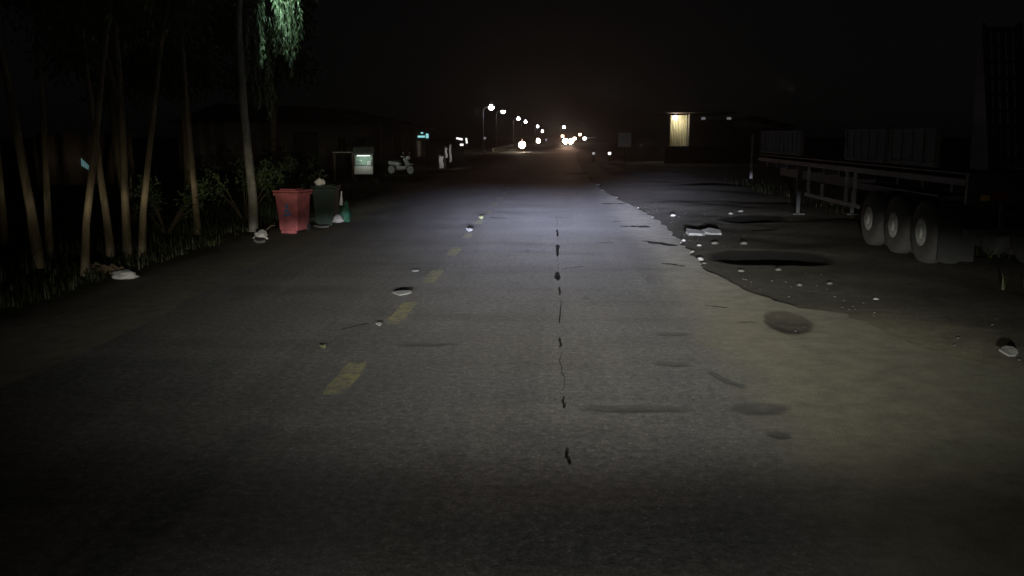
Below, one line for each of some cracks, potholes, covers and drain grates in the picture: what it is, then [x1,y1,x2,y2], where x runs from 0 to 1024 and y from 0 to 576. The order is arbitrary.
pothole [703,368,750,390]
pothole [761,310,816,335]
pothole [764,429,794,441]
pothole [702,249,841,266]
crack [548,217,584,408]
pothole [725,401,796,416]
pothole [569,404,698,414]
